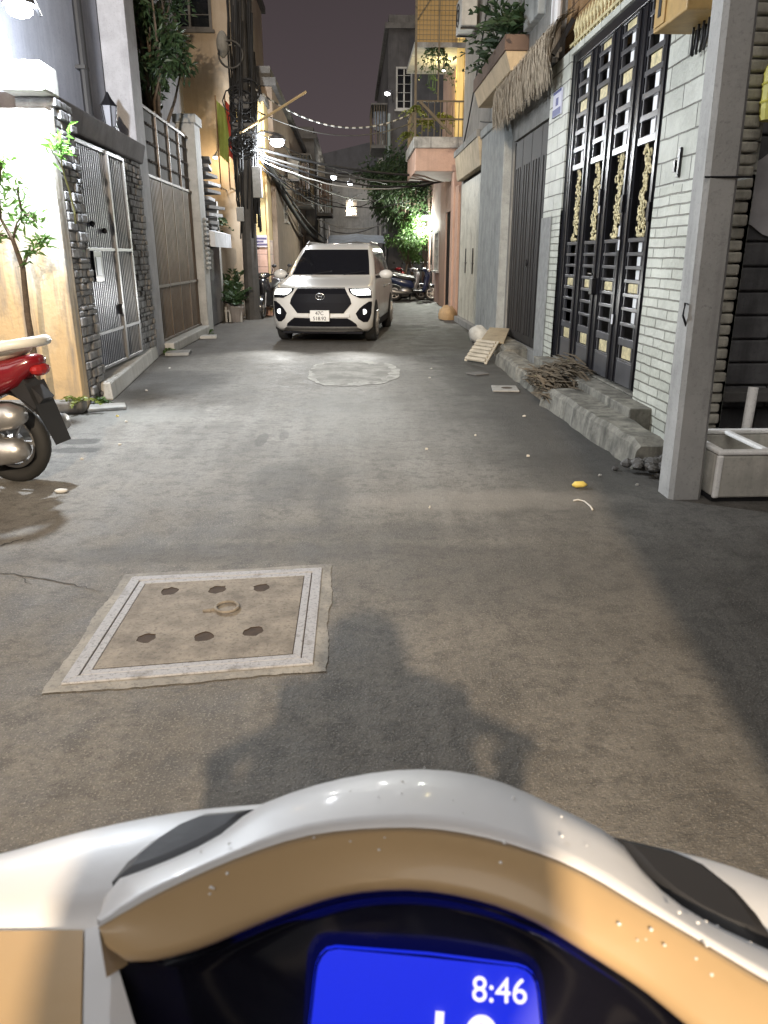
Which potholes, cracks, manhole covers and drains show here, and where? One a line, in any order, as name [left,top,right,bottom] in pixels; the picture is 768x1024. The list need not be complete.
manhole cover [42,564,333,694]
crack [1,573,98,591]
